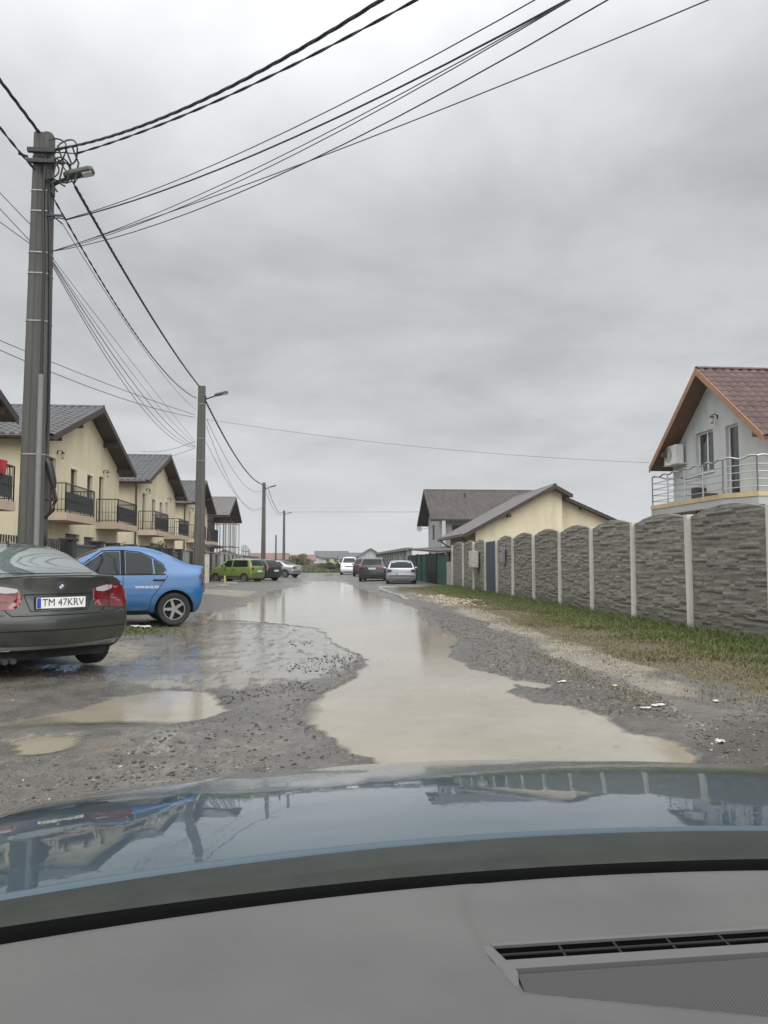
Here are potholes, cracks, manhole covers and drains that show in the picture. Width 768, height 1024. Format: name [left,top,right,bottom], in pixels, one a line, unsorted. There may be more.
pothole [0,687,244,738]
pothole [0,734,98,759]
